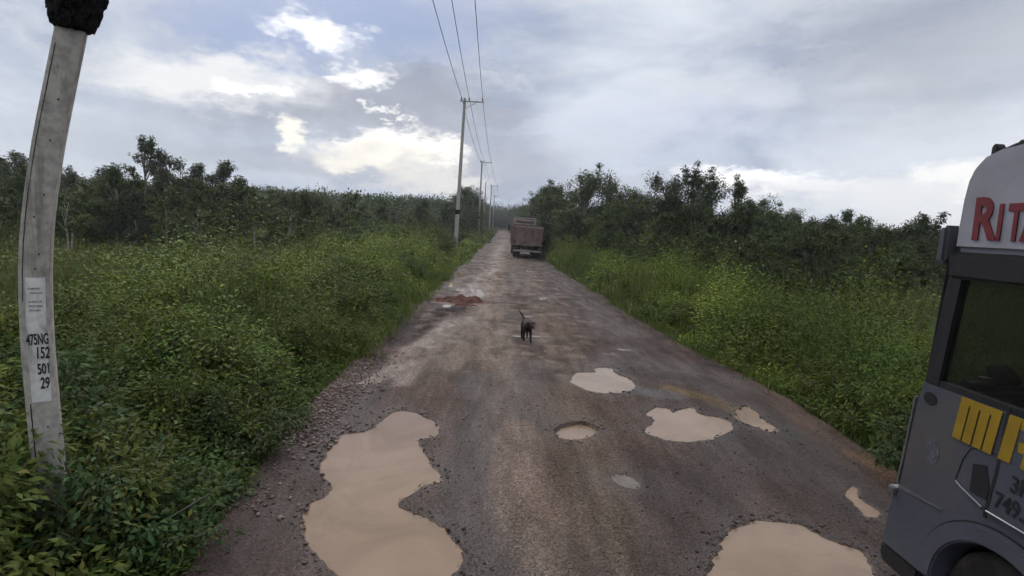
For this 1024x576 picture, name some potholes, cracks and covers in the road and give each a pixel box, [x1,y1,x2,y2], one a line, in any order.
pothole [298,409,466,576]
pothole [843,484,883,520]
pothole [643,406,735,442]
pothole [569,367,637,393]
pothole [733,405,780,432]
pothole [554,421,598,440]
pothole [702,517,879,576]
pothole [611,471,642,490]
